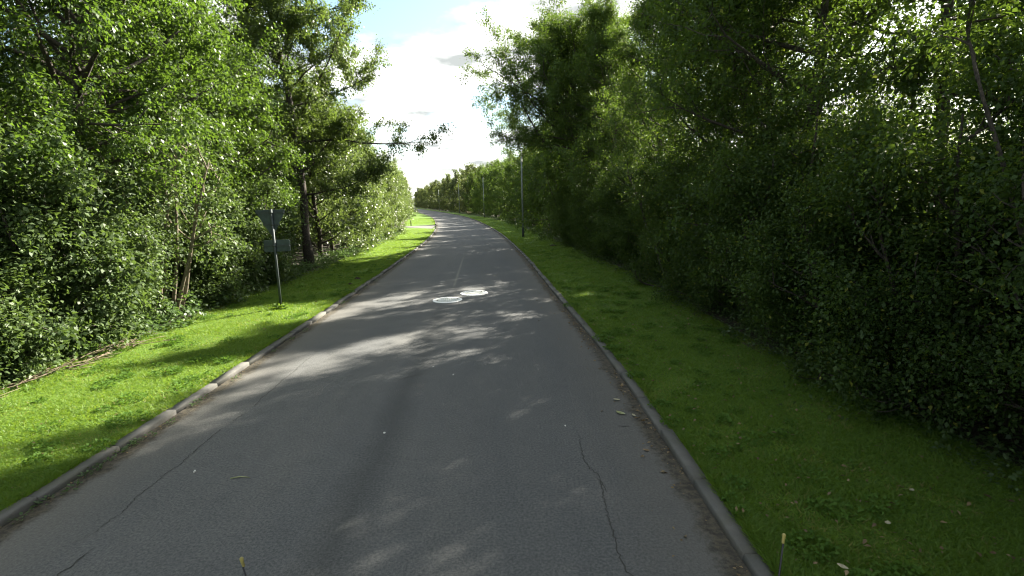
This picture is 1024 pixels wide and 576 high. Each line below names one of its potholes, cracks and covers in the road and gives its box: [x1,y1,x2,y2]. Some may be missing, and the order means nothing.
crack [73,352,316,543]
crack [578,435,633,576]
